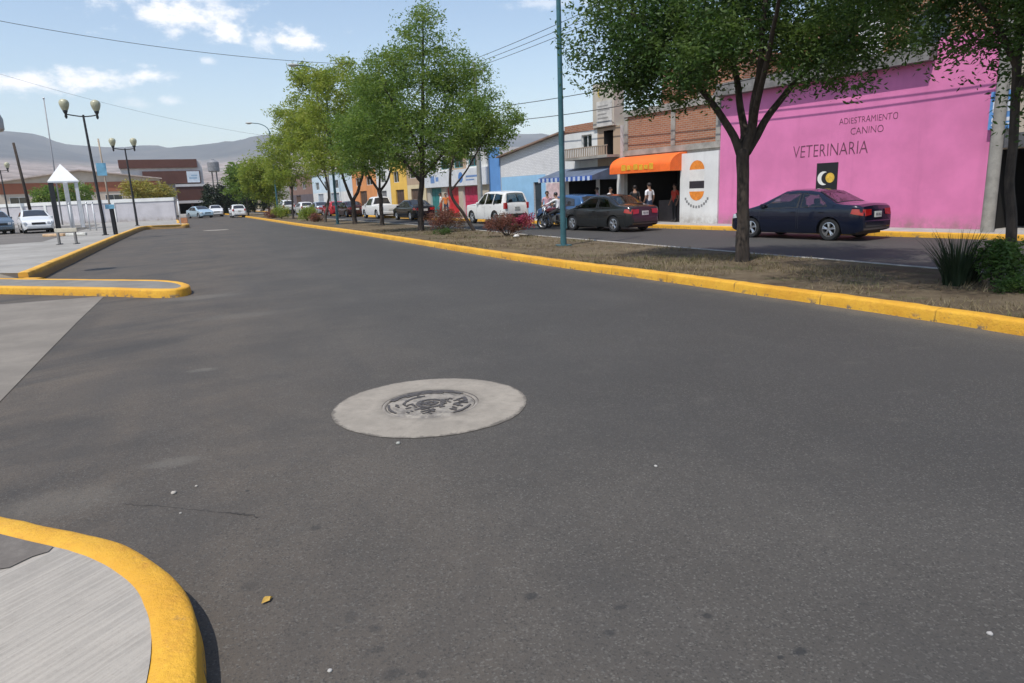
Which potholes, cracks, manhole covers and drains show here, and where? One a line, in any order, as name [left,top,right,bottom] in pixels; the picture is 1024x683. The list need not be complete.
crack [131,503,256,517]
manhole cover [331,378,527,438]
